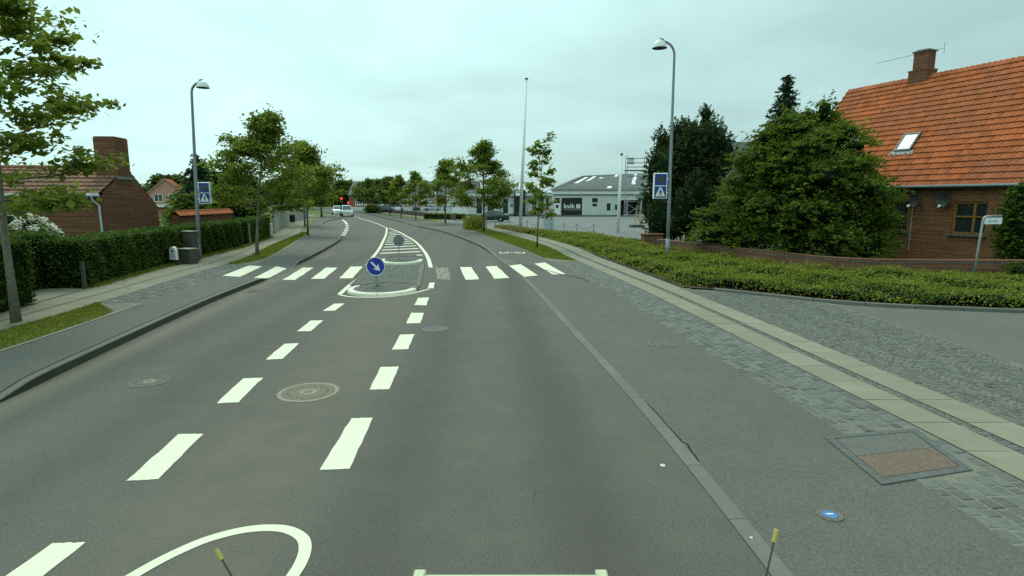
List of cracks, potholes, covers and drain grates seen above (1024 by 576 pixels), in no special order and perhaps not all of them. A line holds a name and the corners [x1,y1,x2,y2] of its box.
utility cover [823,428,972,485]
manhole cover [646,339,679,348]
crack [648,404,699,461]
manhole cover [276,382,340,402]
manhole cover [126,376,171,388]
